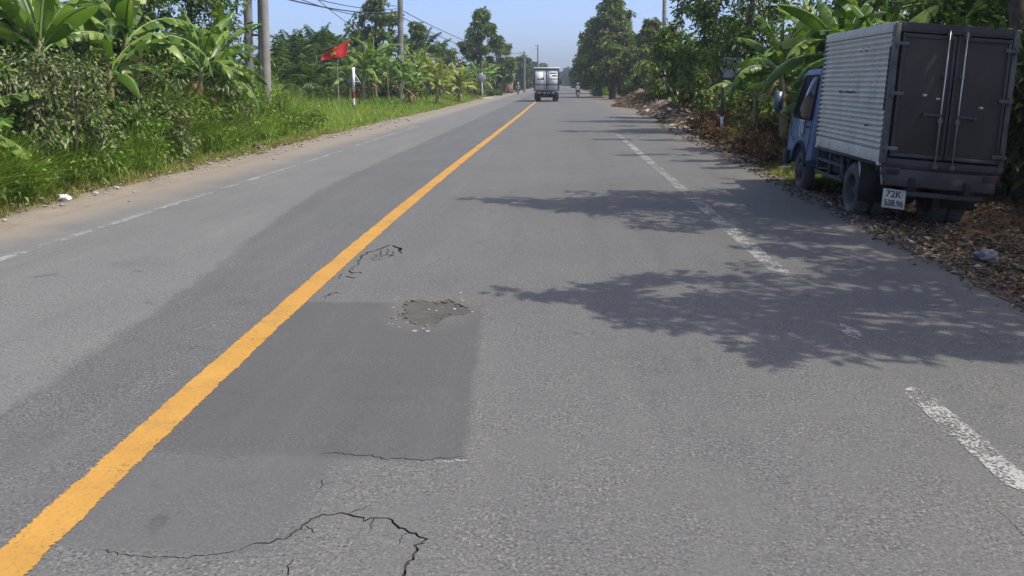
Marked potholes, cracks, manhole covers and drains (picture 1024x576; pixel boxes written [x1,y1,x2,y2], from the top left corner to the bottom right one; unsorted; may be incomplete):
crack [100,506,428,576]
pothole [388,292,488,332]
crack [323,245,402,299]
